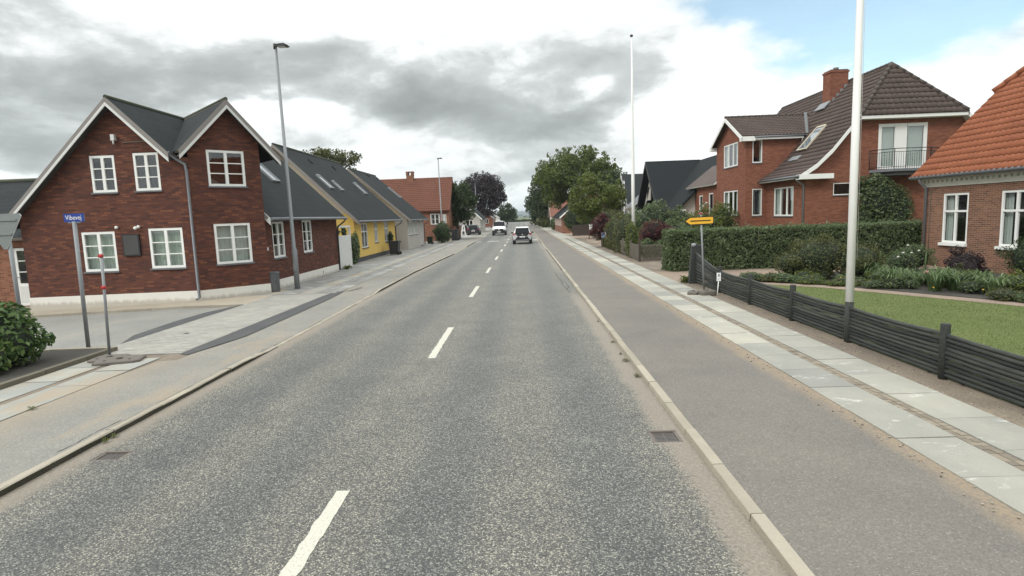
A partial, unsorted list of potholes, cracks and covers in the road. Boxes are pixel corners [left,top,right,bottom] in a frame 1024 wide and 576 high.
drain grate [91,450,134,461]
drain grate [647,430,683,443]
